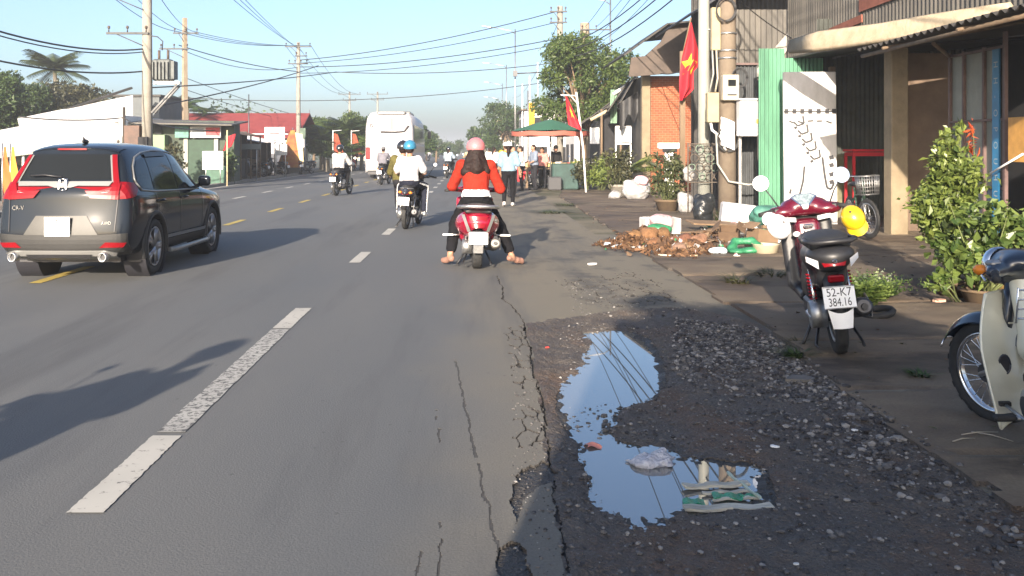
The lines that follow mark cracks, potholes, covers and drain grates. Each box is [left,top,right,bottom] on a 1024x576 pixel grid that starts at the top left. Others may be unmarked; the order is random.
pothole [495,541,533,576]
crack [435,276,571,573]
pothole [509,460,558,522]
pothole [554,331,778,526]
crack [415,522,443,576]
